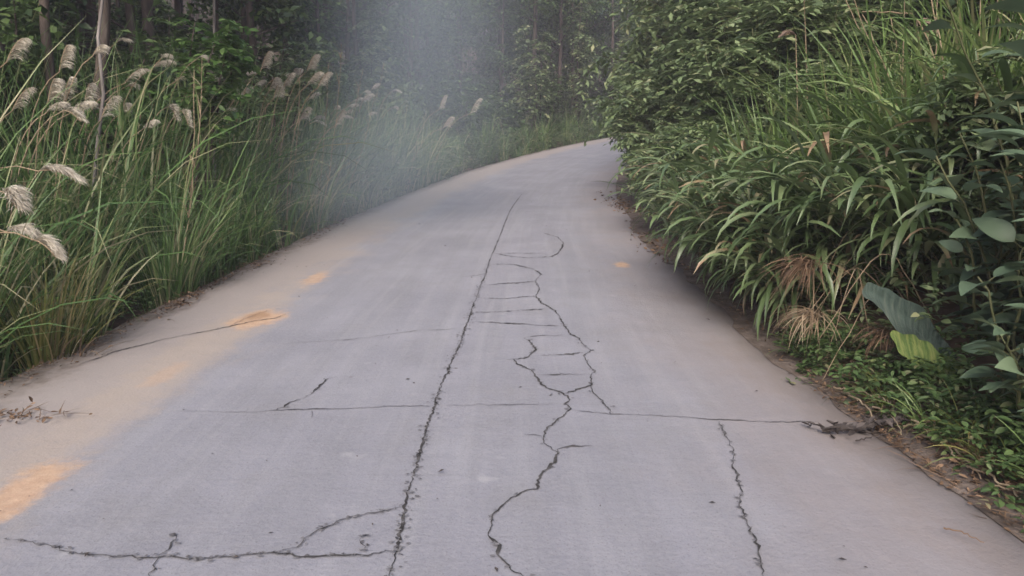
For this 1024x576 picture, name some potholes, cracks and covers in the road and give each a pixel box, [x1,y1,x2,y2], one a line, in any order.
crack [3,194,522,576]
crack [717,423,764,575]
